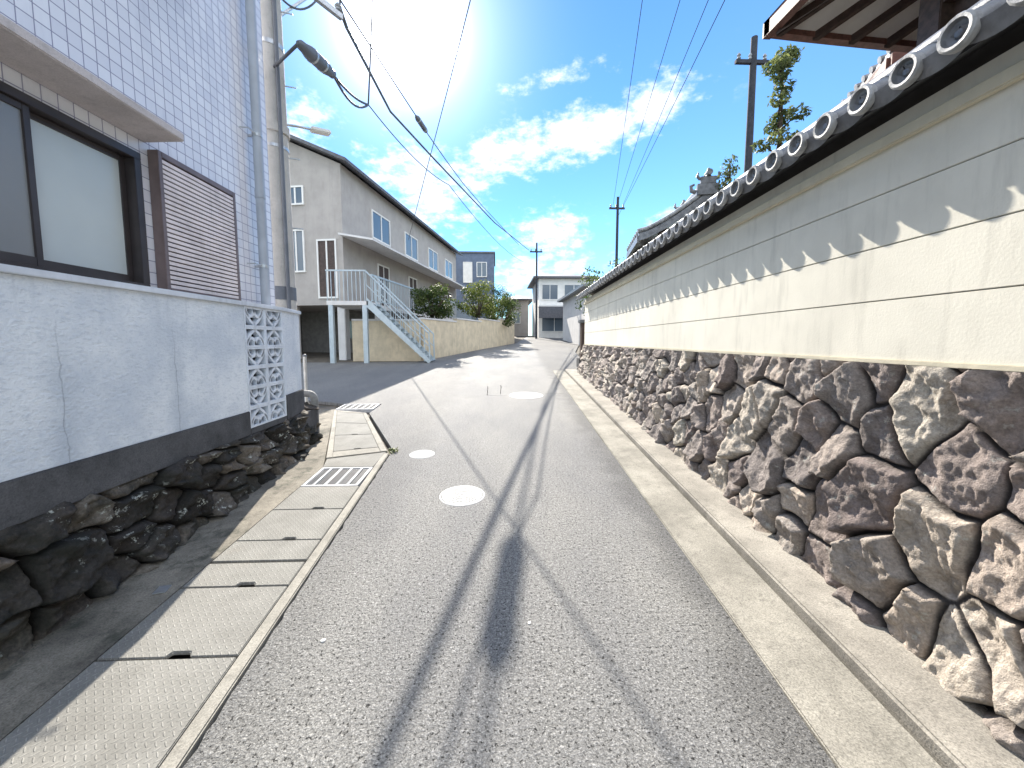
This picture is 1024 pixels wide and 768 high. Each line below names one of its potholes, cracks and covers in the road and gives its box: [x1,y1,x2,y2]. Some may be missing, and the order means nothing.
drain grate [301,467,373,487]
manhole cover [409,450,435,459]
manhole cover [439,486,485,506]
drain grate [335,404,380,413]
